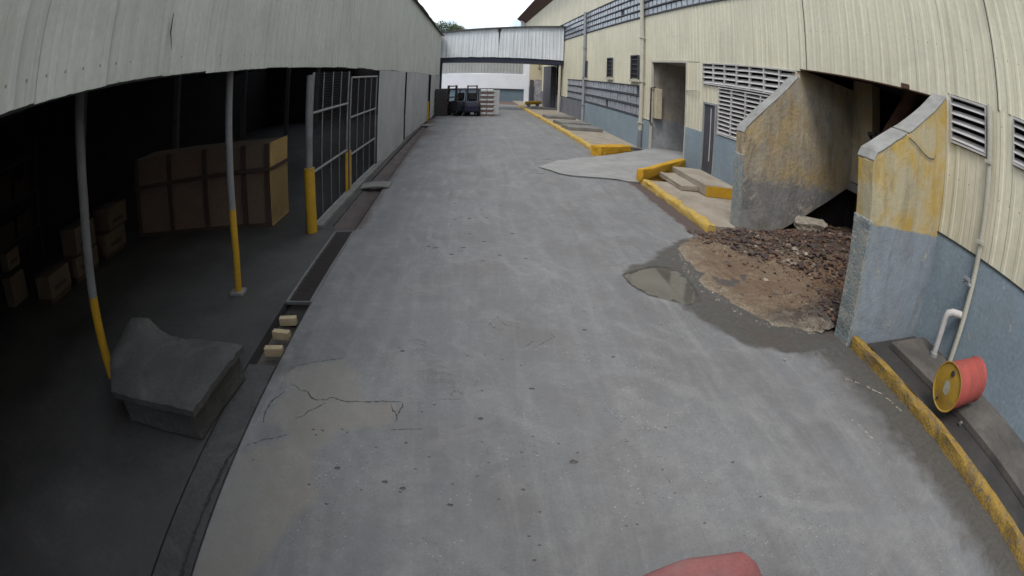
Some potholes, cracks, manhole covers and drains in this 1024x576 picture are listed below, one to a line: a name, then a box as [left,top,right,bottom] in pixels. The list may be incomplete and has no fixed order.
drain grate [286,231,355,305]
crack [243,357,404,447]
pothole [623,265,703,305]
